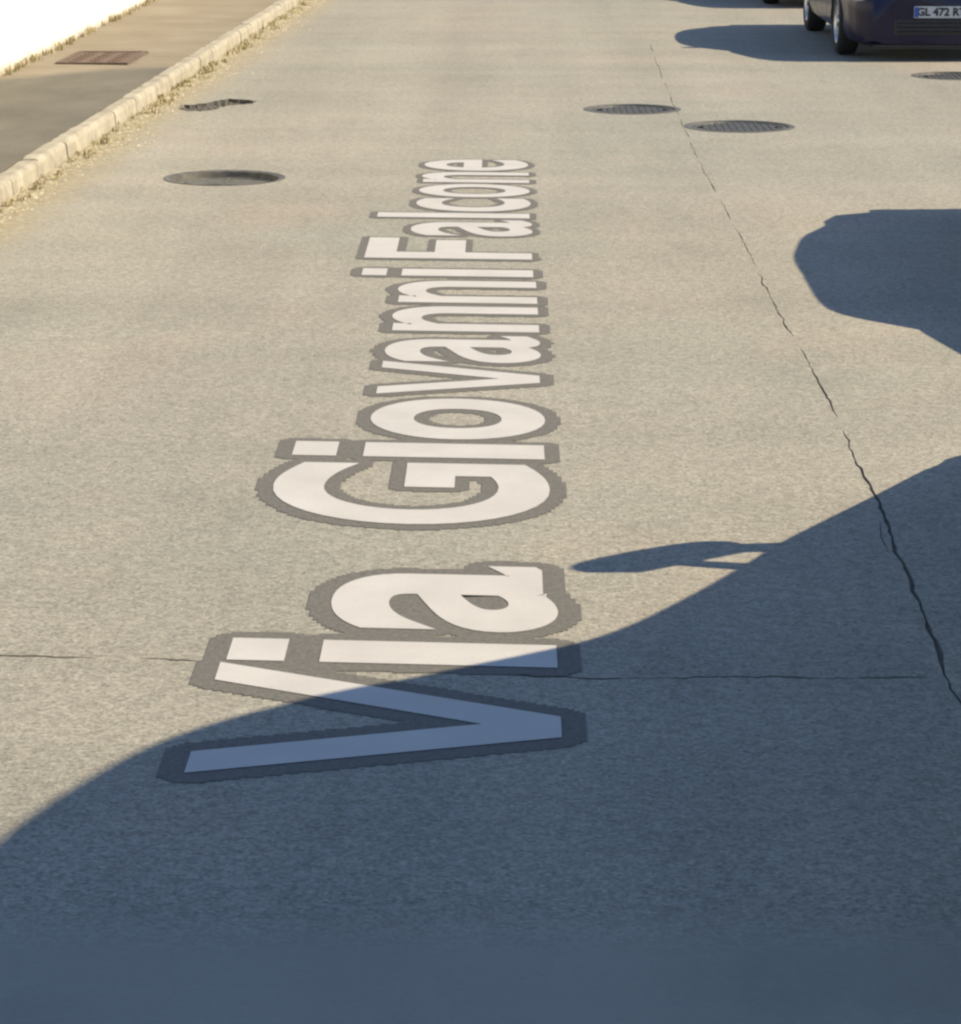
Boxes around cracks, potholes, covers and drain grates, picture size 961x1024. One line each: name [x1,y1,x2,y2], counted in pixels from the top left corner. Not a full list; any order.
pothole [178,99,256,111]
manhole cover [584,104,681,115]
utility cover [55,51,148,65]
manhole cover [163,170,286,186]
manhole cover [684,120,795,133]
manhole cover [911,72,961,80]
